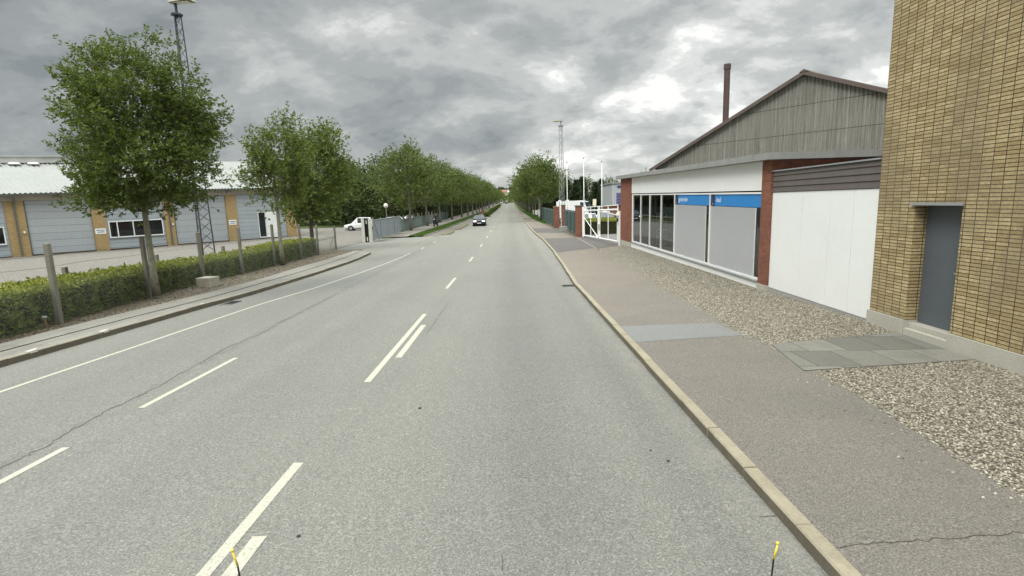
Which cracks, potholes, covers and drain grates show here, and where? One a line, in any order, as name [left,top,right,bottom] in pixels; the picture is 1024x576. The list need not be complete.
crack [0,287,342,468]
crack [836,531,1024,548]
